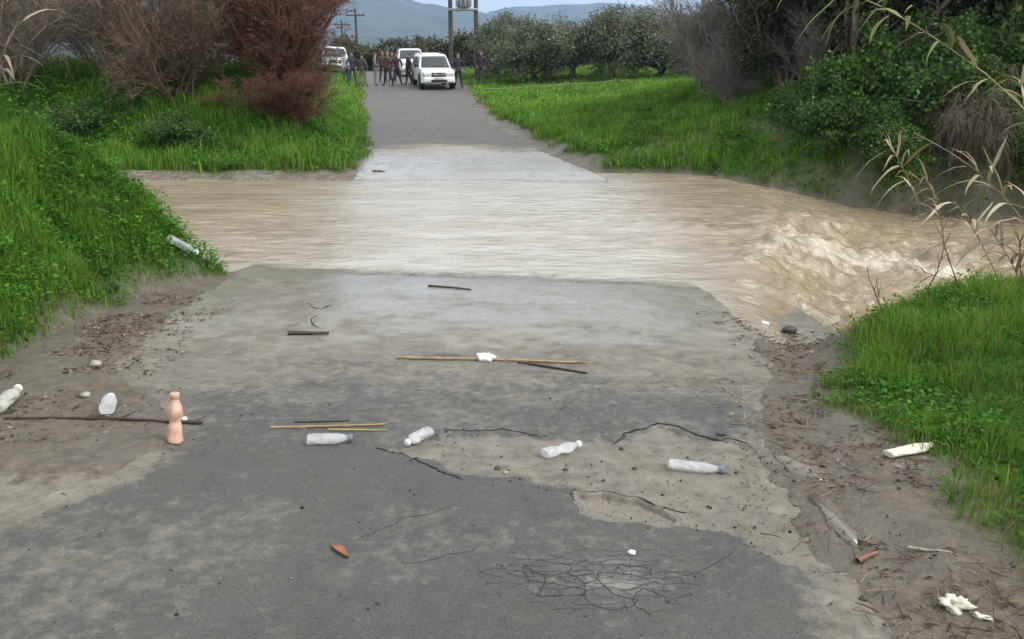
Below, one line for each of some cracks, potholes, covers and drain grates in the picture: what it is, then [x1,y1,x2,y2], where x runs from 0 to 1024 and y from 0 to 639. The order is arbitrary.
pothole [570,489,683,528]
crack [375,447,462,479]
crack [614,422,747,444]
crack [478,545,734,615]
crack [444,399,576,435]
